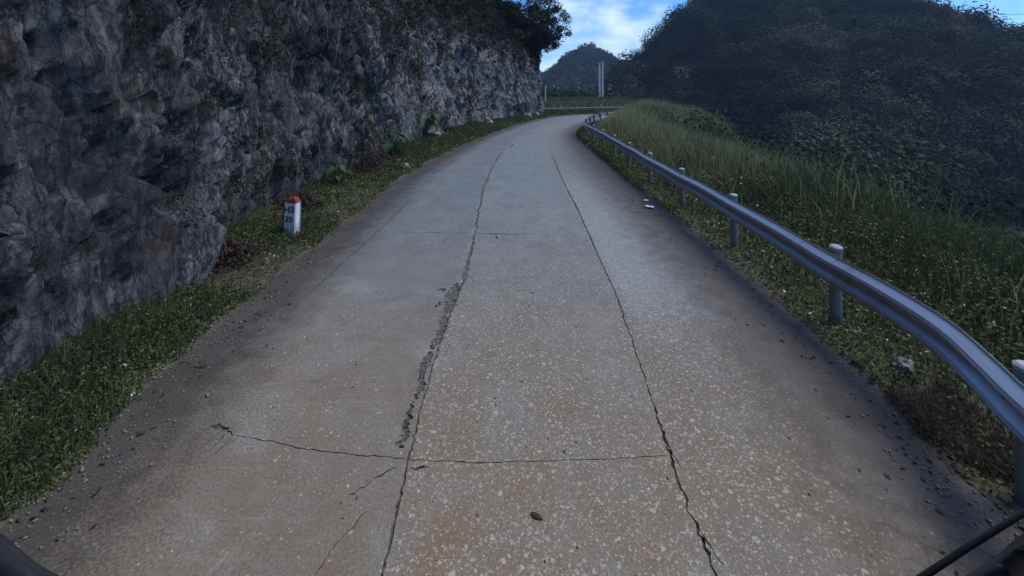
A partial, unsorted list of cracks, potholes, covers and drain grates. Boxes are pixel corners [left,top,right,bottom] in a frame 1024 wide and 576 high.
crack [156,144,666,576]
